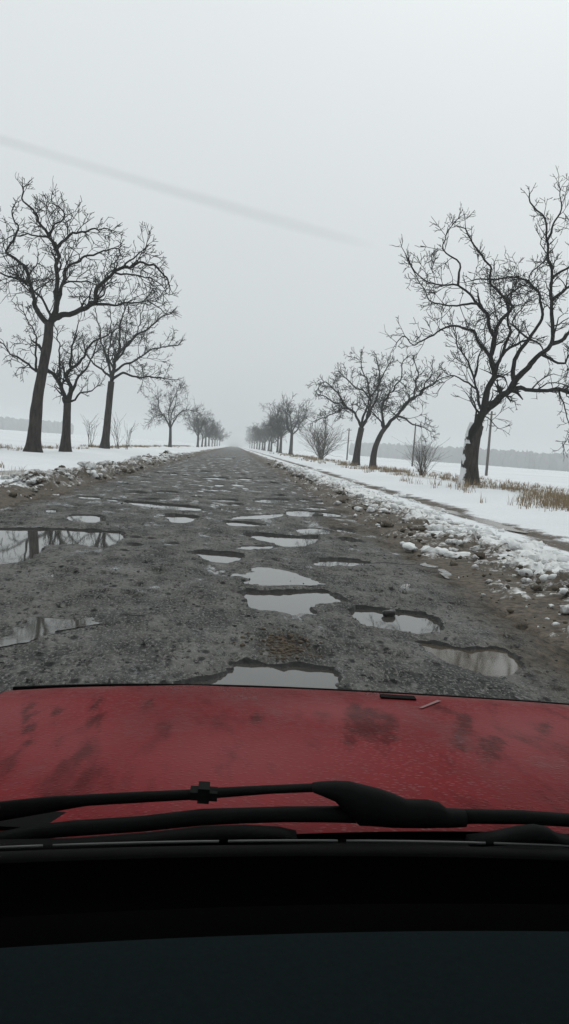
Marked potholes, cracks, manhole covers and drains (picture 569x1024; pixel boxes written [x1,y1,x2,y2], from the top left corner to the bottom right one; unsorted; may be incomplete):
pothole [347,605,445,634]
pothole [173,657,352,690]
pothole [415,640,526,677]
pothole [186,549,245,563]
pothole [163,513,201,523]
pothole [65,514,107,523]
pothole [312,557,371,566]
pothole [243,532,320,547]
pothole [236,588,349,615]
pothole [0,527,126,564]
